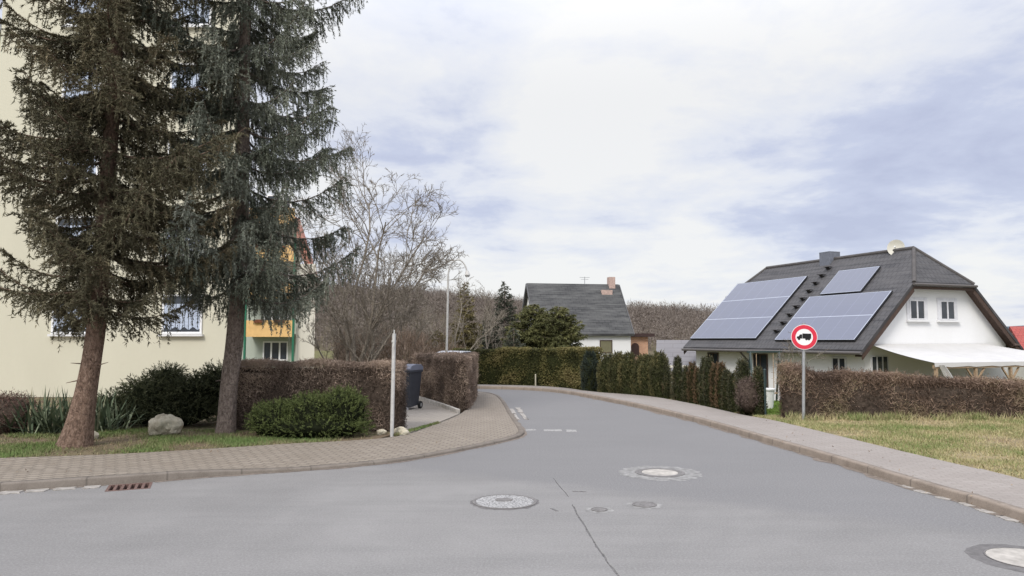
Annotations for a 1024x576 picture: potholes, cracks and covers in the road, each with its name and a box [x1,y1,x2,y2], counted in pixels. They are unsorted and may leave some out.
manhole cover [618,466,702,481]
manhole cover [964,544,1024,573]
drain grate [105,482,153,492]
manhole cover [626,501,663,509]
crack [550,478,619,576]
manhole cover [470,494,539,510]
